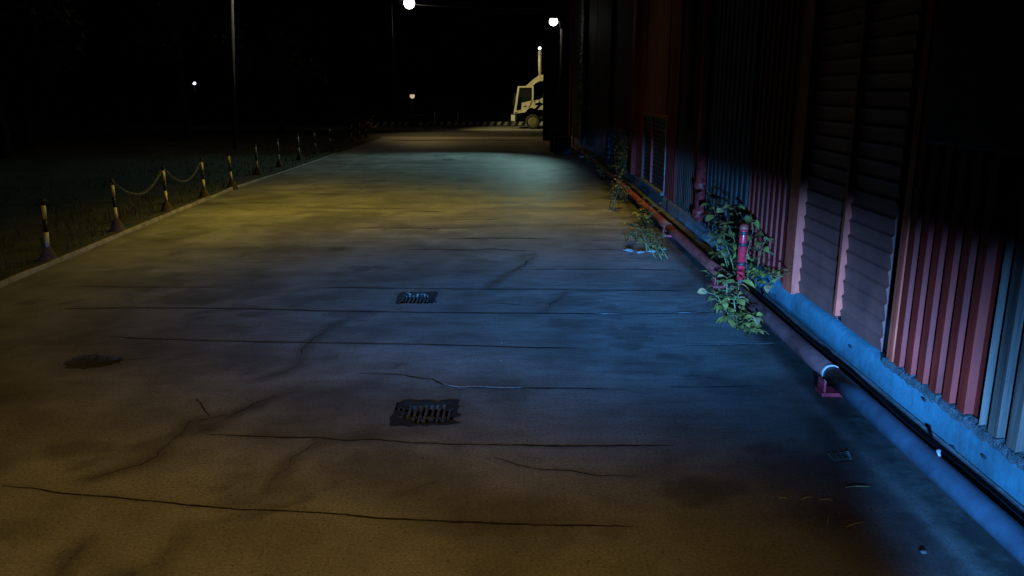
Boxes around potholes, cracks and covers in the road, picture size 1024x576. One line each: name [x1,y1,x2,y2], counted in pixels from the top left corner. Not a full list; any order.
drain grate [390,399,461,427]
crack [2,397,673,526]
crack [64,211,718,314]
drain grate [395,292,438,304]
crack [361,364,589,389]
pothole [63,354,123,369]
